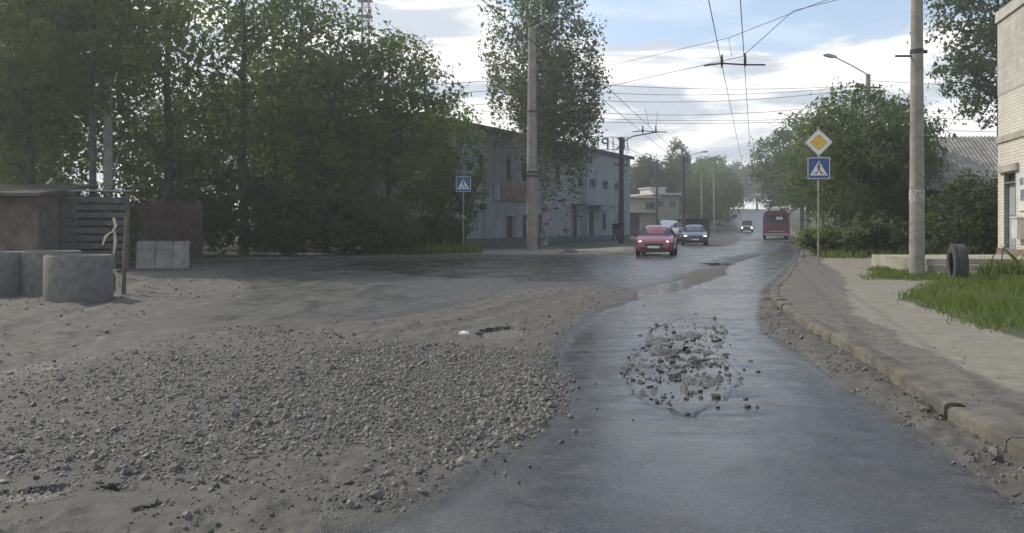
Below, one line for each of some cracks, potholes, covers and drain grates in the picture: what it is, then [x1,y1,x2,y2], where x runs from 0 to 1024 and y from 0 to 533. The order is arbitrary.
pothole [470,325,532,340]
pothole [621,318,744,418]
pothole [0,479,84,507]
pothole [126,499,171,514]
pothole [88,480,137,493]
